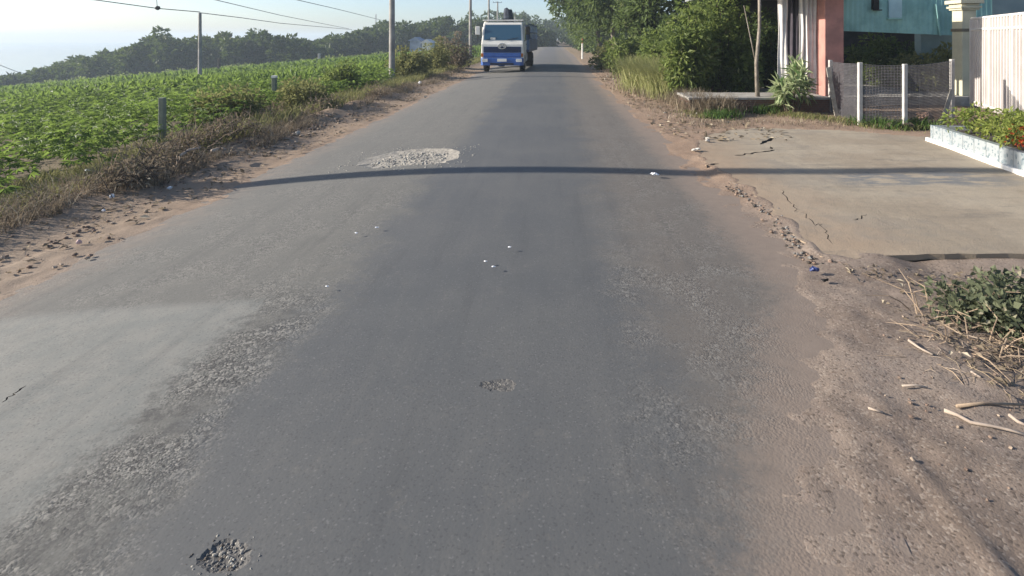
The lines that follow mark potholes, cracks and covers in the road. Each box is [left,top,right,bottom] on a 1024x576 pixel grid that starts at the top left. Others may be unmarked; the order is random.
crack [736,138,775,156]
pothole [475,377,517,392]
crack [782,190,832,243]
pothole [185,534,261,576]
